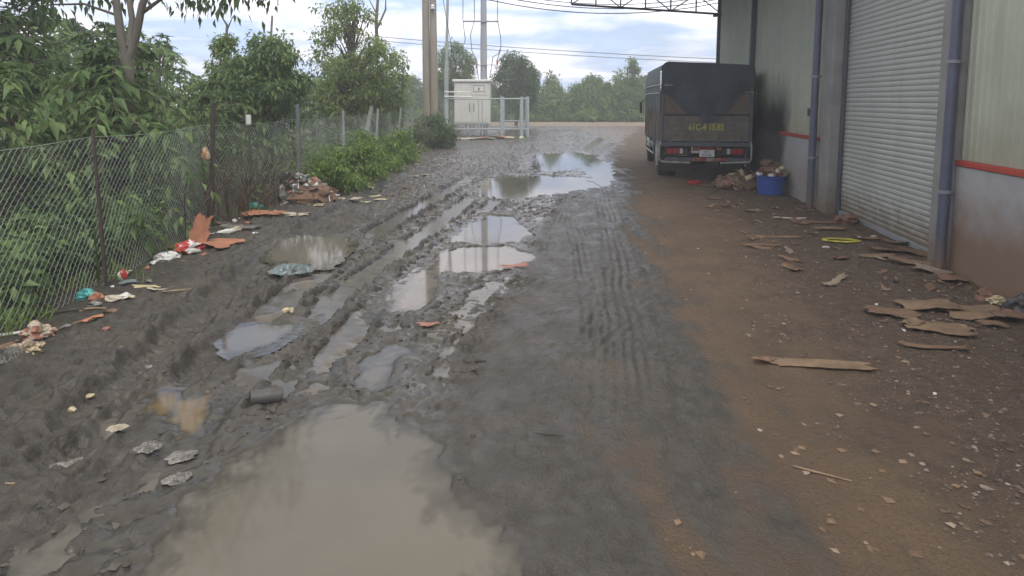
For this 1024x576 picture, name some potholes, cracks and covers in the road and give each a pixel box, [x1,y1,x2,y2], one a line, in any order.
pothole [110,391,552,576]
pothole [259,232,361,273]
pothole [212,316,305,362]
pothole [131,382,229,441]
